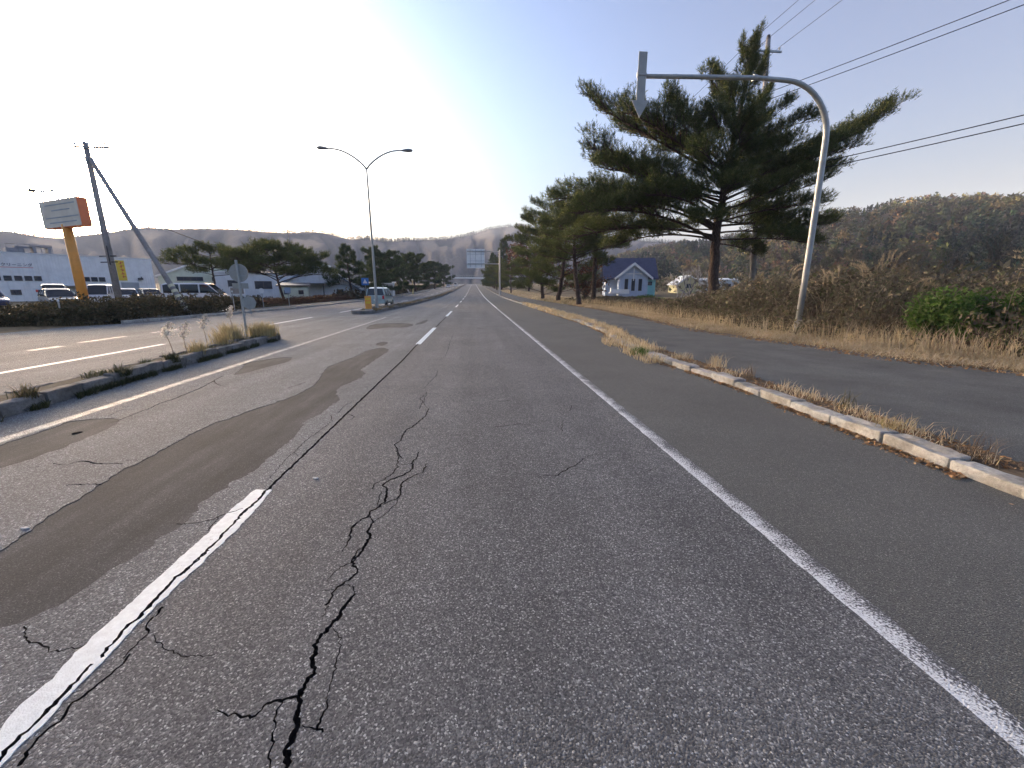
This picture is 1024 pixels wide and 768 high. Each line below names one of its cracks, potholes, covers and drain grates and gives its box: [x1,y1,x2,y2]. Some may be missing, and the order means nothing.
crack [16,336,453,768]
